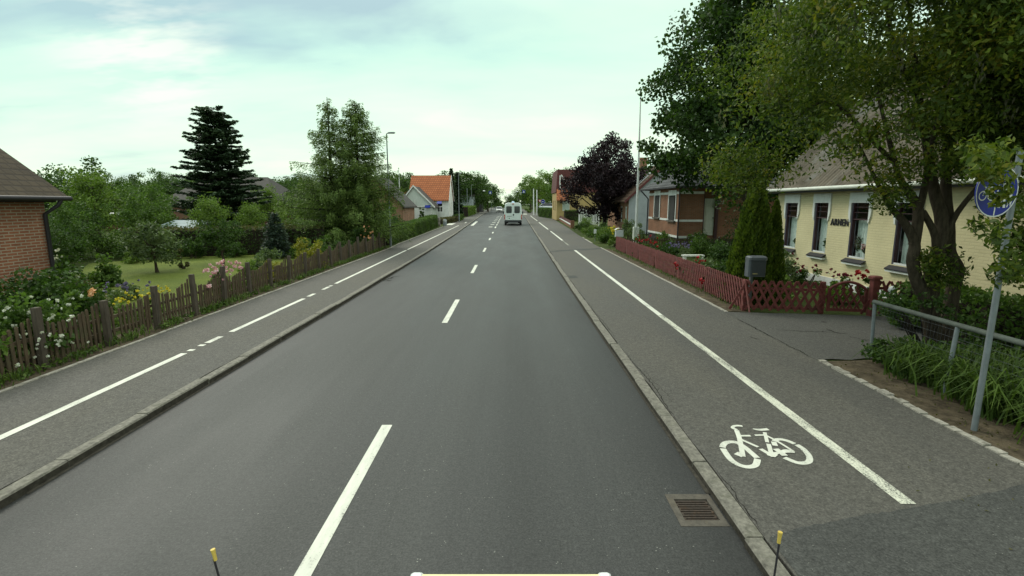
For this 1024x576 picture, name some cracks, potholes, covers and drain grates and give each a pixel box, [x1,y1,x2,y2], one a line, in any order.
drain grate [664,494,730,527]
